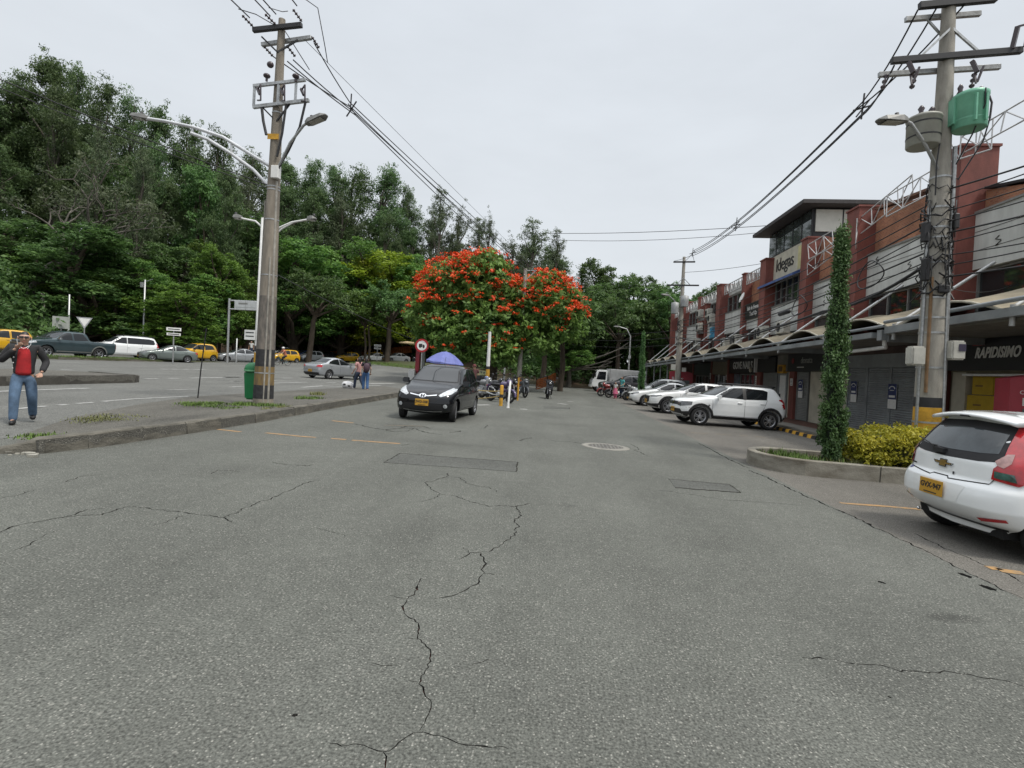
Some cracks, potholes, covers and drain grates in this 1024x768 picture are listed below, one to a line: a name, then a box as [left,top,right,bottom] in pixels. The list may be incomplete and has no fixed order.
crack [1,480,319,550]
crack [330,578,508,768]
crack [802,657,1024,687]
manhole cover [581,443,630,451]
crack [418,473,526,600]
